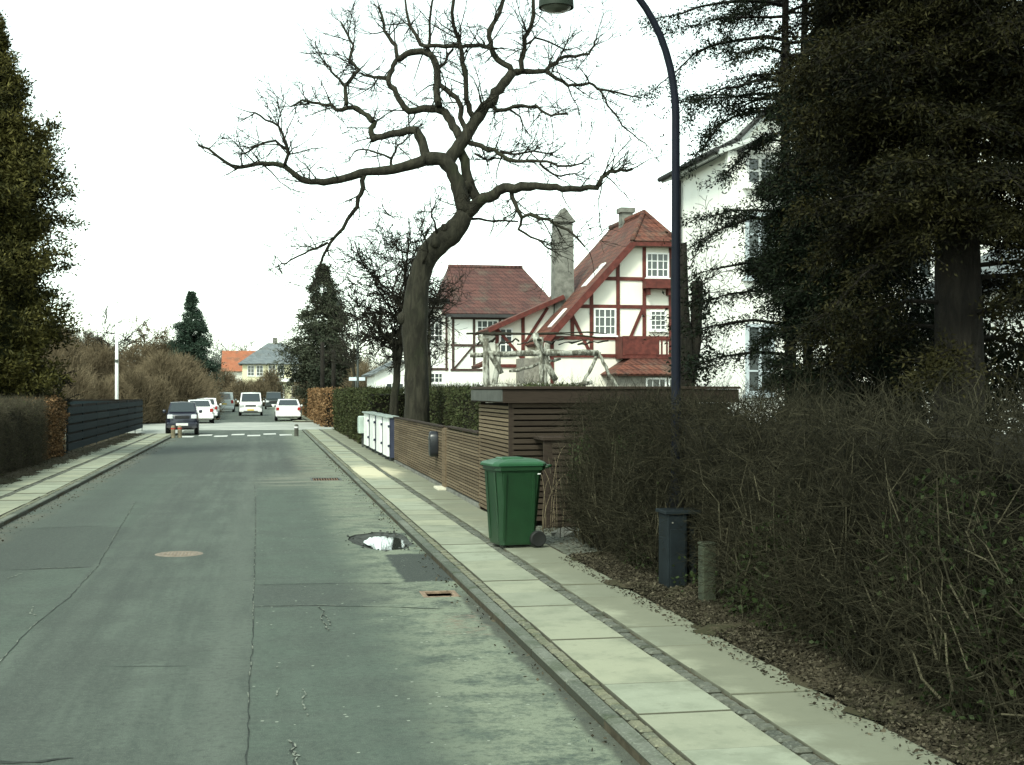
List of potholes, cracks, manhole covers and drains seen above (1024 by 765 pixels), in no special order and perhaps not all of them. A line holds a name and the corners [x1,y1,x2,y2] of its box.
crack [260,605,441,631]
pothole [345,530,413,551]
crack [288,740,300,765]
